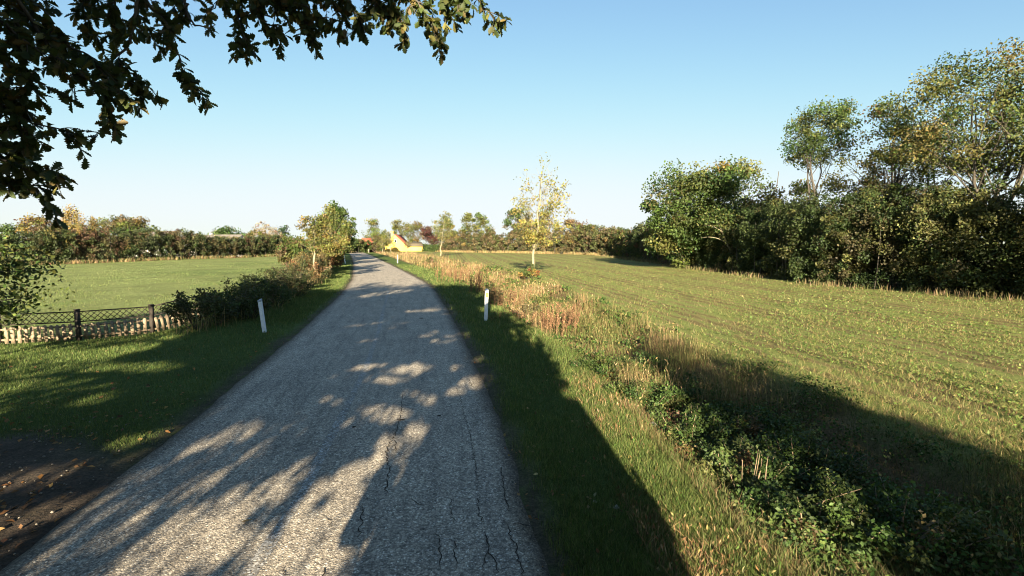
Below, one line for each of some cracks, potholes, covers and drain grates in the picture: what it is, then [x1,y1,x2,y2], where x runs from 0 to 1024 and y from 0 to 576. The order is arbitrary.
crack [384,395,404,494]
crack [477,467,536,575]
crack [435,499,458,568]
